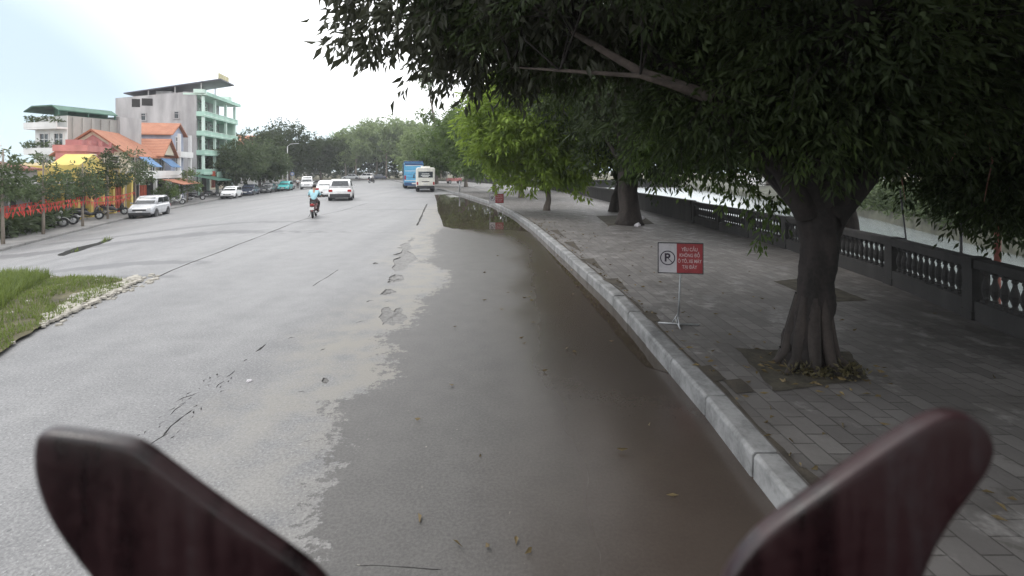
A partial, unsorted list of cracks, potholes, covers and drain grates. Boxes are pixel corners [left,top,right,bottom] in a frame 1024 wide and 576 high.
crack [137,344,266,443]
pothole [378,307,407,326]
pothole [392,237,418,271]
